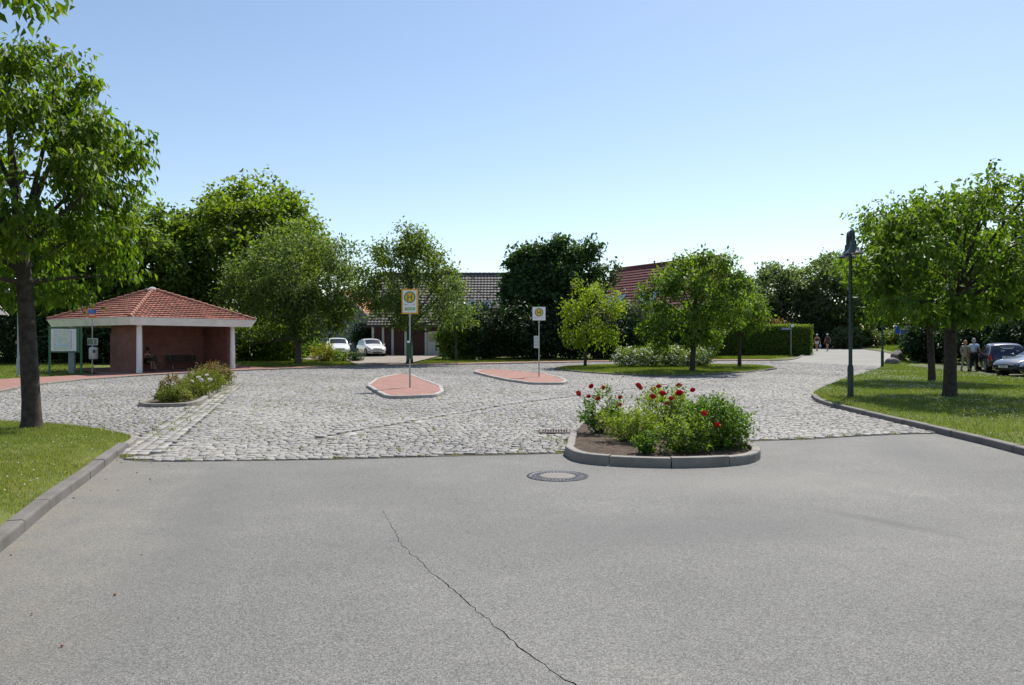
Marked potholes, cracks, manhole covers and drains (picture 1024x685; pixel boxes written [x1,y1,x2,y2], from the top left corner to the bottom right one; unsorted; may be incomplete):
crack [384,513,577,685]
manhole cover [527,470,589,482]
